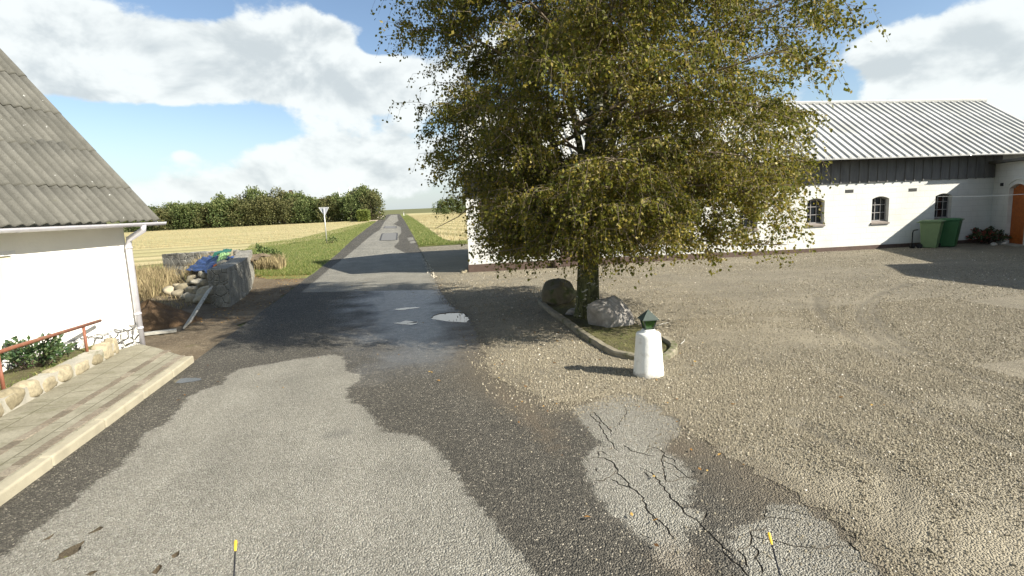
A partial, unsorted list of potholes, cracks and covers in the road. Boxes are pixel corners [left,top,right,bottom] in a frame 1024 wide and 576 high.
crack [588,407,859,576]
